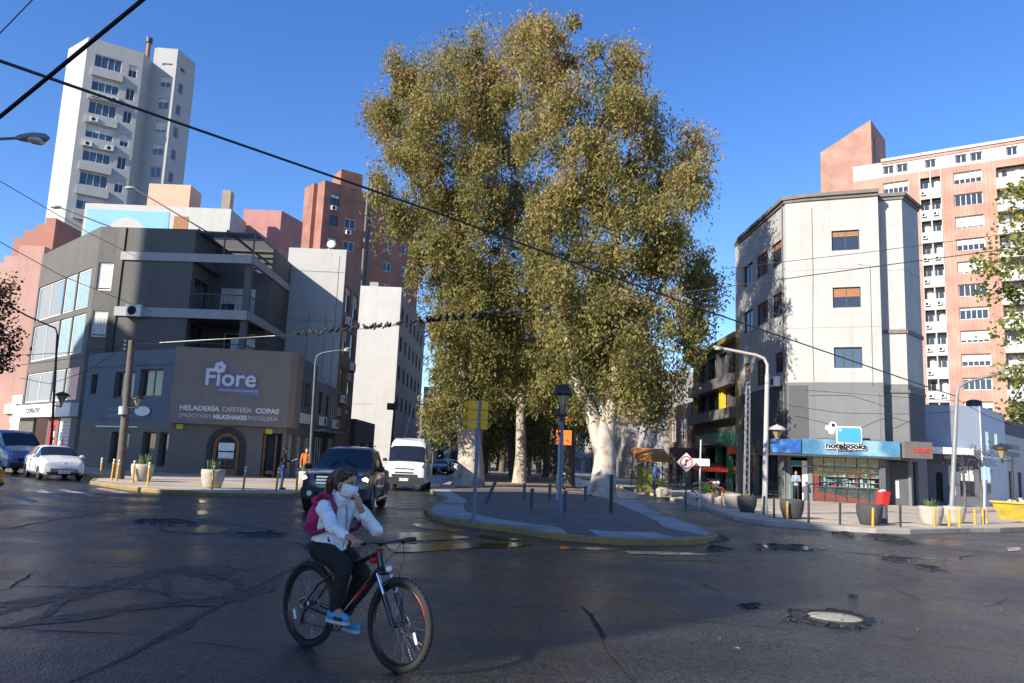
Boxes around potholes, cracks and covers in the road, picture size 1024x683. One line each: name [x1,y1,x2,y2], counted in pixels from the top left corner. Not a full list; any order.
crack [0,572,209,595]
pothole [125,518,207,527]
pothole [749,543,830,552]
manhole cover [807,611,865,624]
pothole [913,564,942,572]
pothole [881,555,916,563]
crack [2,622,278,652]
crack [577,605,635,683]
